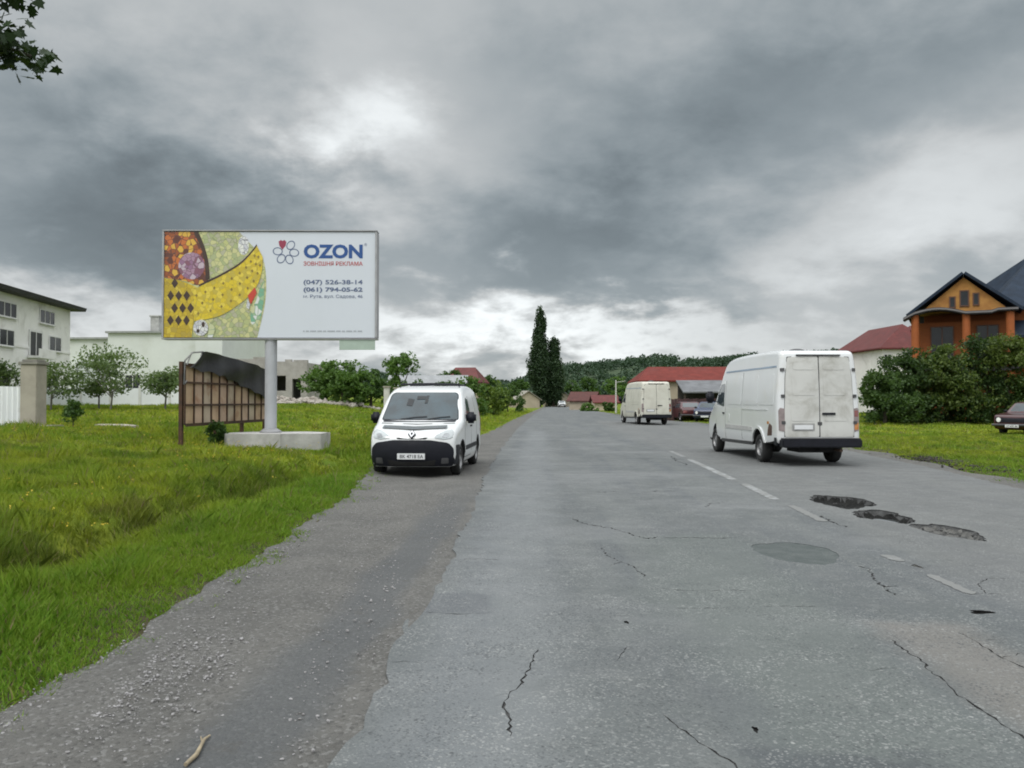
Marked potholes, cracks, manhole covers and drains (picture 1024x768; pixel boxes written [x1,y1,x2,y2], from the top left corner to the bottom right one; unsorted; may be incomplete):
pothole [852,510,916,524]
crack [664,715,738,768]
pothole [909,524,986,541]
crack [500,649,539,736]
crack [573,518,698,539]
pothole [809,495,876,509]
crack [960,633,1024,668]
crack [859,566,895,595]
